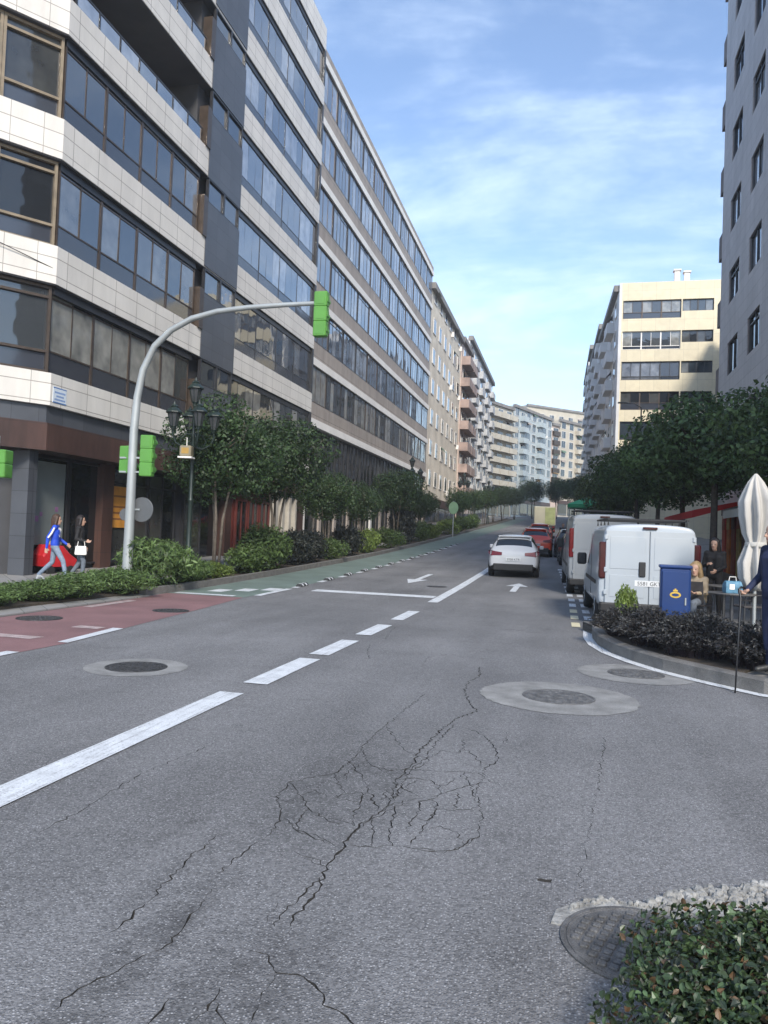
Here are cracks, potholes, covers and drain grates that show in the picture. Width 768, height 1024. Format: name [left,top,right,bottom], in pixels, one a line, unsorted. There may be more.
manhole cover [560,906,704,989]
crack [216,667,500,932]
manhole cover [83,659,188,676]
crack [148,999,169,1024]
manhole cover [480,681,641,716]
crack [38,743,213,834]
crack [53,836,216,1012]
manhole cover [577,664,696,685]
crack [195,950,354,1024]
